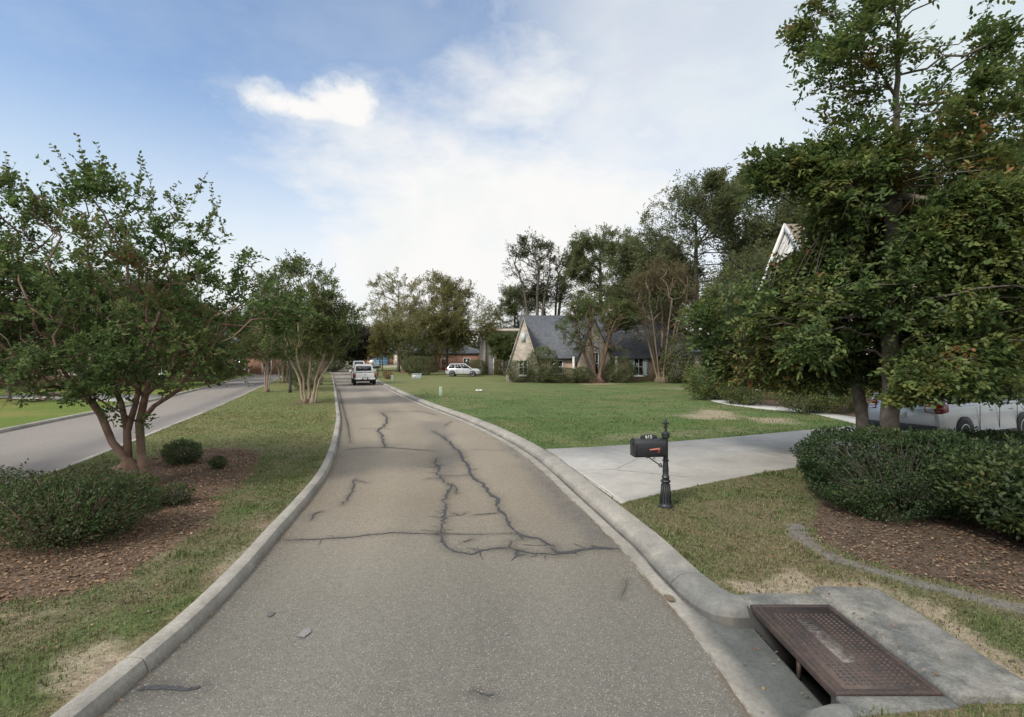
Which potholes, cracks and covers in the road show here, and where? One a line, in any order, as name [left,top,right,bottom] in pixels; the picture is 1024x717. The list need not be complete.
crack [311,479,366,519]
drain grate [739,586,1024,717]
crack [362,411,558,561]
